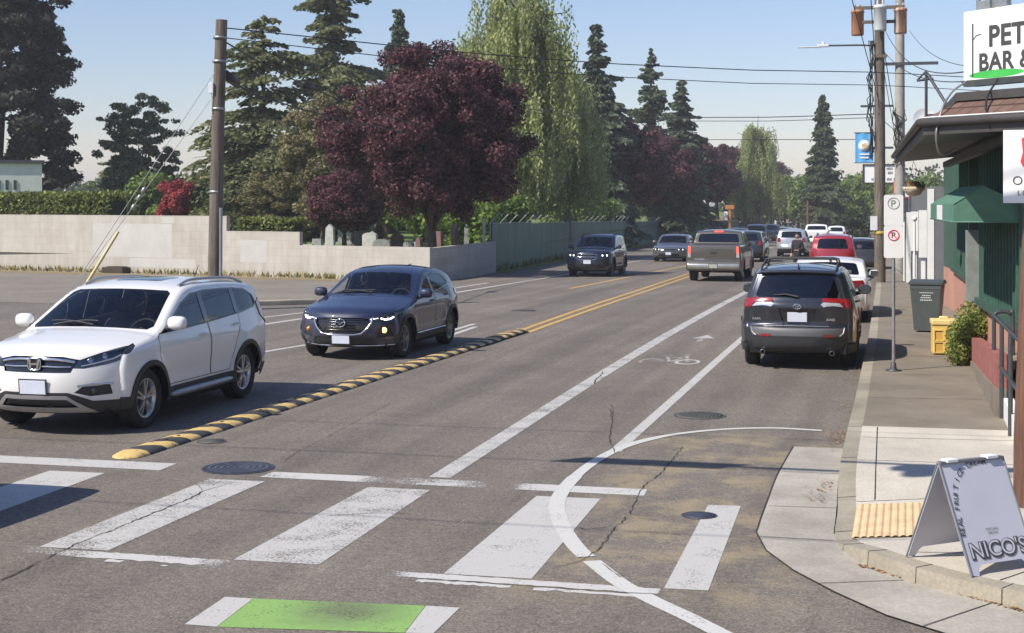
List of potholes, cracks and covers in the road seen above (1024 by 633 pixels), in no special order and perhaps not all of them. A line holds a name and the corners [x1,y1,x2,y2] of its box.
manhole cover [201,461,275,474]
crack [417,446,683,594]
manhole cover [674,411,726,419]
manhole cover [681,511,717,519]
